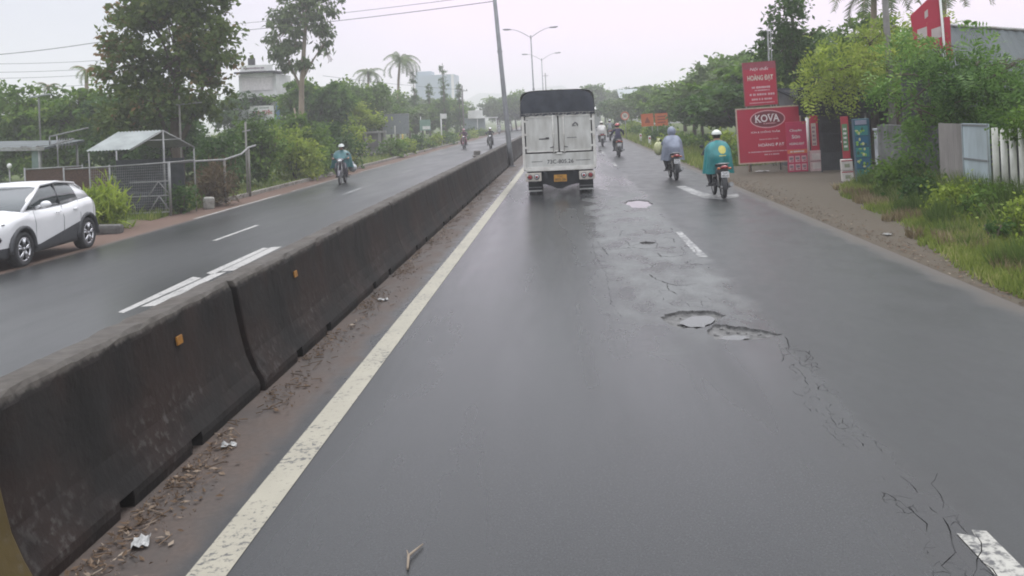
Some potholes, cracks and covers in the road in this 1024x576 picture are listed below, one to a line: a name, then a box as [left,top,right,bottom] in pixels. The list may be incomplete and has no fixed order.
pothole [707,324,782,340]
crack [870,475,997,576]
crack [776,337,882,452]
pothole [661,310,726,329]
crack [649,274,713,307]
